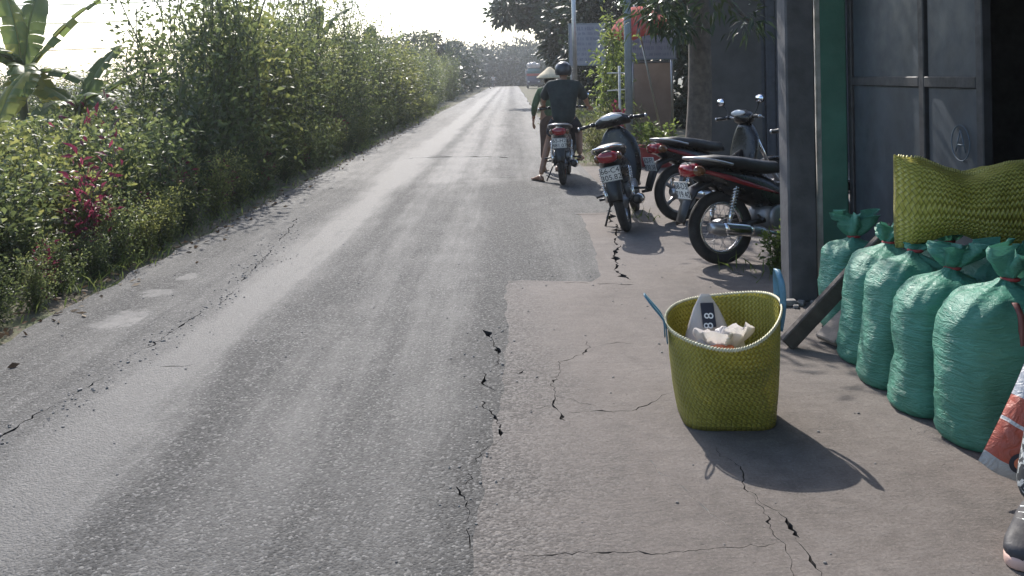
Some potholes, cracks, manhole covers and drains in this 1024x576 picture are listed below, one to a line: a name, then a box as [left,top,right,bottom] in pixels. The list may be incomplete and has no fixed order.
crack [606,210,631,280]
crack [515,342,669,420]
crack [526,445,822,576]
crack [456,330,523,547]
crack [2,219,297,436]
